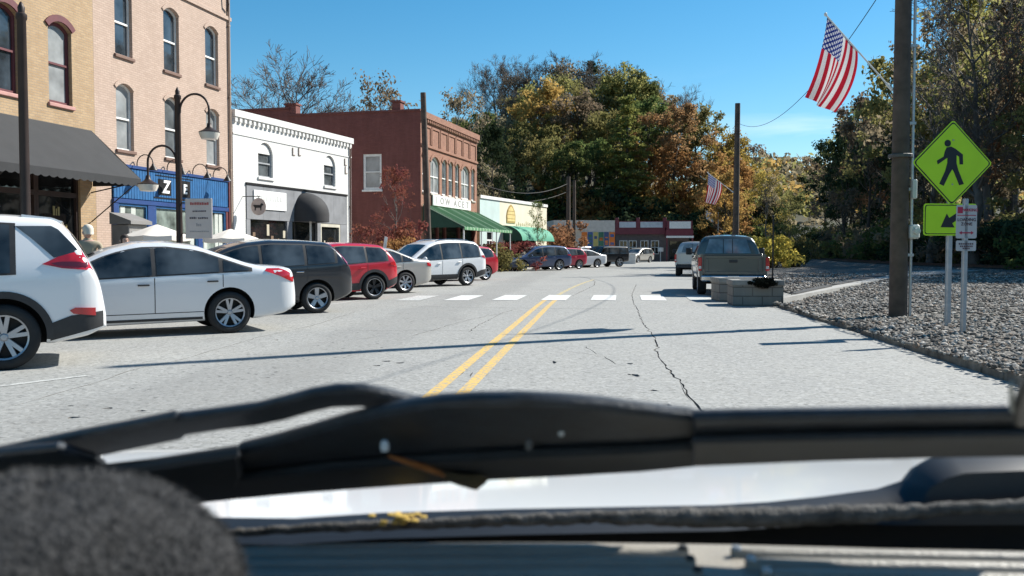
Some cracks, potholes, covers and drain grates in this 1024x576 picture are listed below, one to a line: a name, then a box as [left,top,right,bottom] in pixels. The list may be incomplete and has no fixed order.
crack [555,275,701,409]
